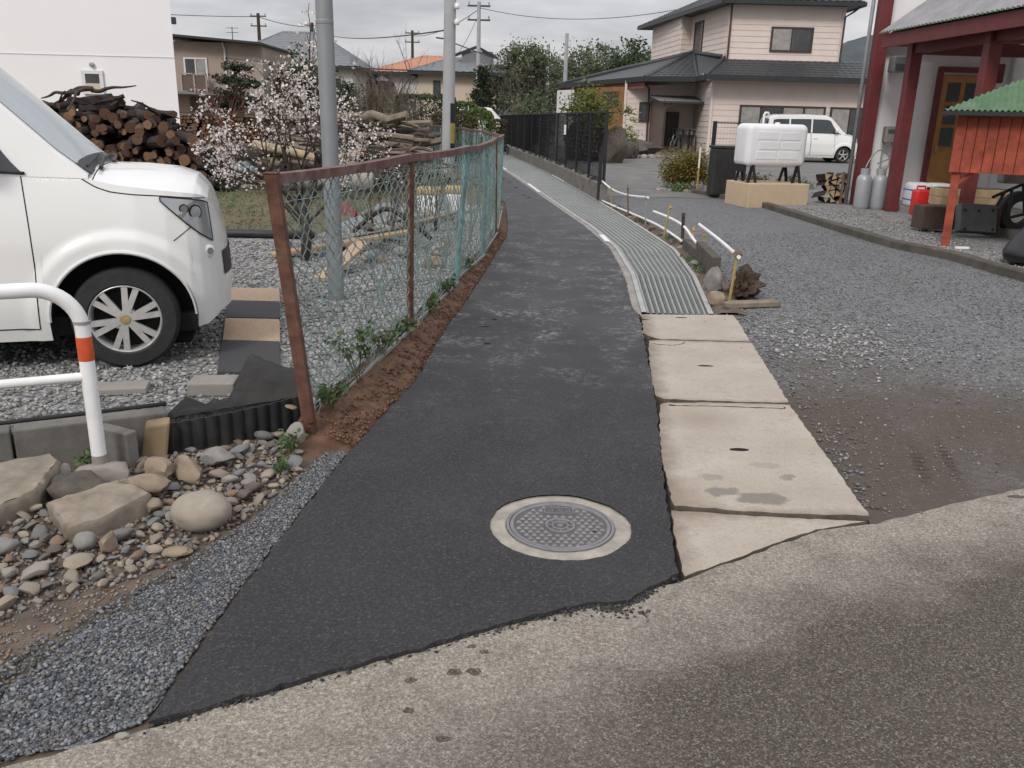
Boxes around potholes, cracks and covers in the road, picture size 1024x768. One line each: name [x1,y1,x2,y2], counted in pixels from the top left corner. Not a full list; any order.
manhole cover [490,496,632,560]
